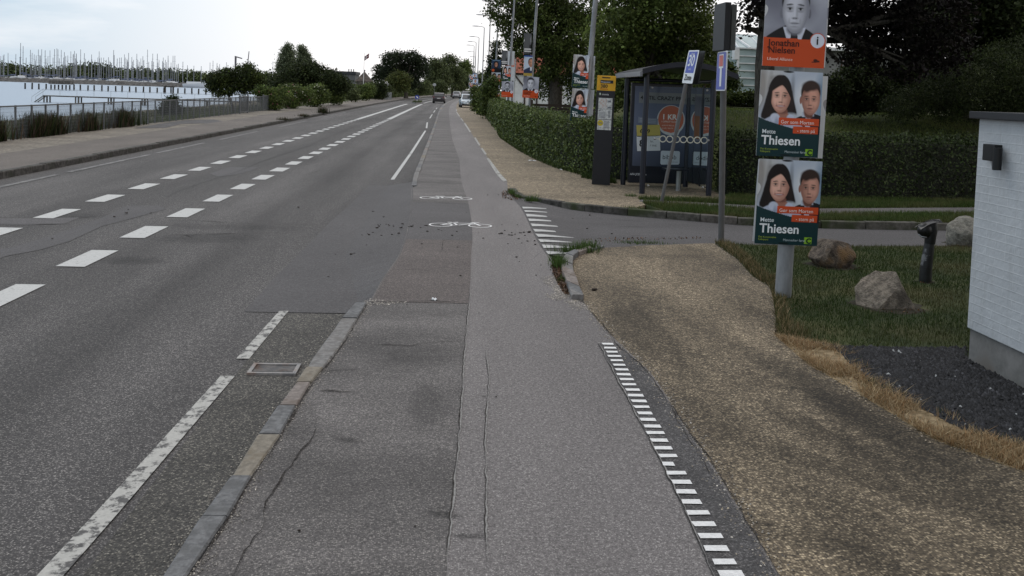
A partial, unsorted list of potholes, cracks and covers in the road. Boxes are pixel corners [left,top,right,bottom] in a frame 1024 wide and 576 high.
crack [233,417,318,575]
drain grate [246,363,301,376]
